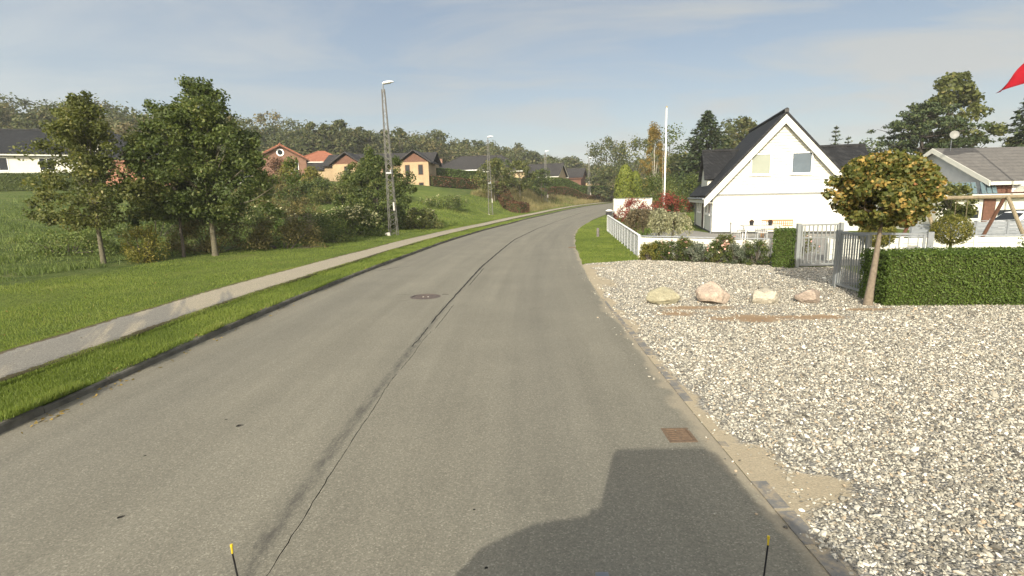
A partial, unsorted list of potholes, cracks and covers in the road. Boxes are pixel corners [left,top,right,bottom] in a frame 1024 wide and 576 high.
drain grate [661,428,698,443]
